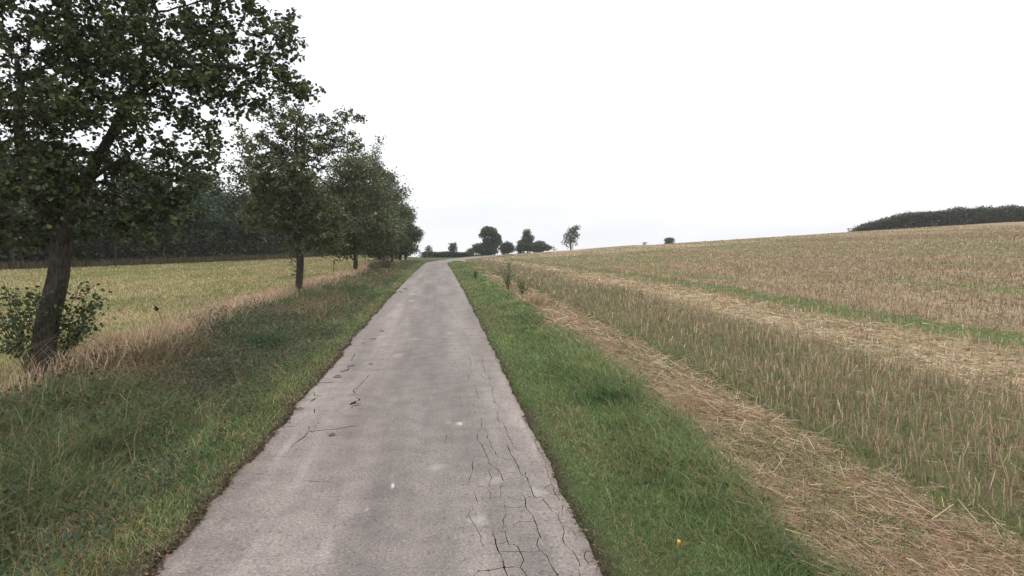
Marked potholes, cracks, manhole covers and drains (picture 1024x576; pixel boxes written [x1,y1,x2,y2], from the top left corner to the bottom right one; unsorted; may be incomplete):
crack [287,355,368,446]
crack [455,358,597,576]
